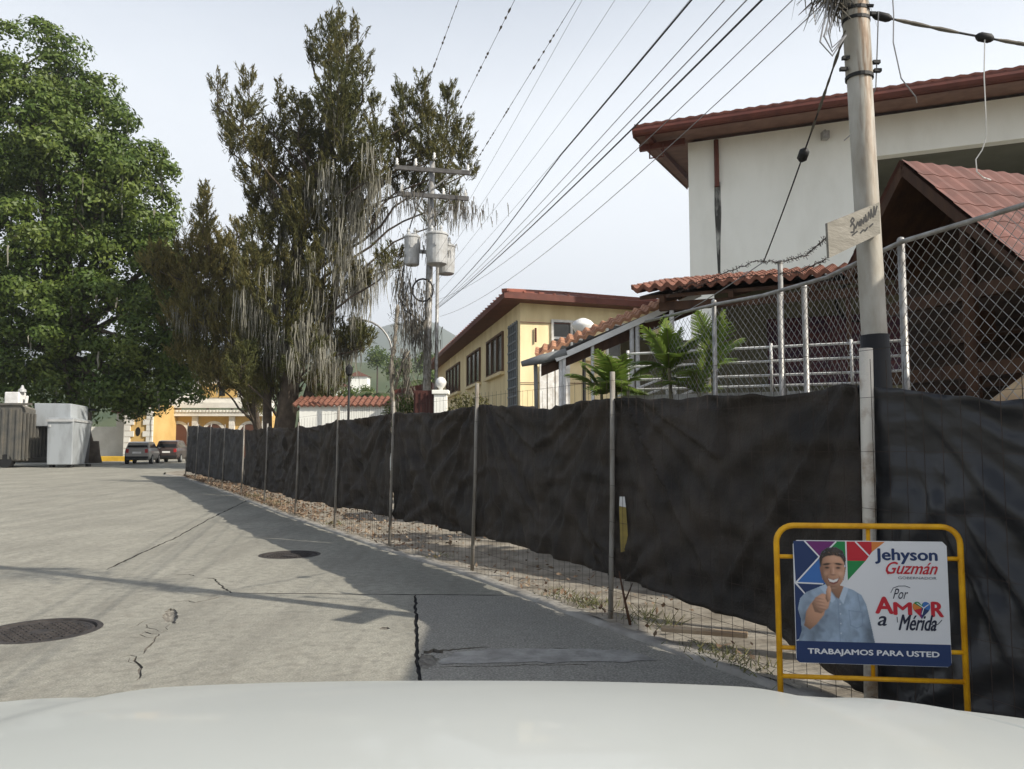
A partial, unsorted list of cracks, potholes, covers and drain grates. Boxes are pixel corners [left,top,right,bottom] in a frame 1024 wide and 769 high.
crack [183,574,232,603]
crack [118,618,168,681]
manhole cover [258,550,321,559]
manhole cover [0,618,104,644]
